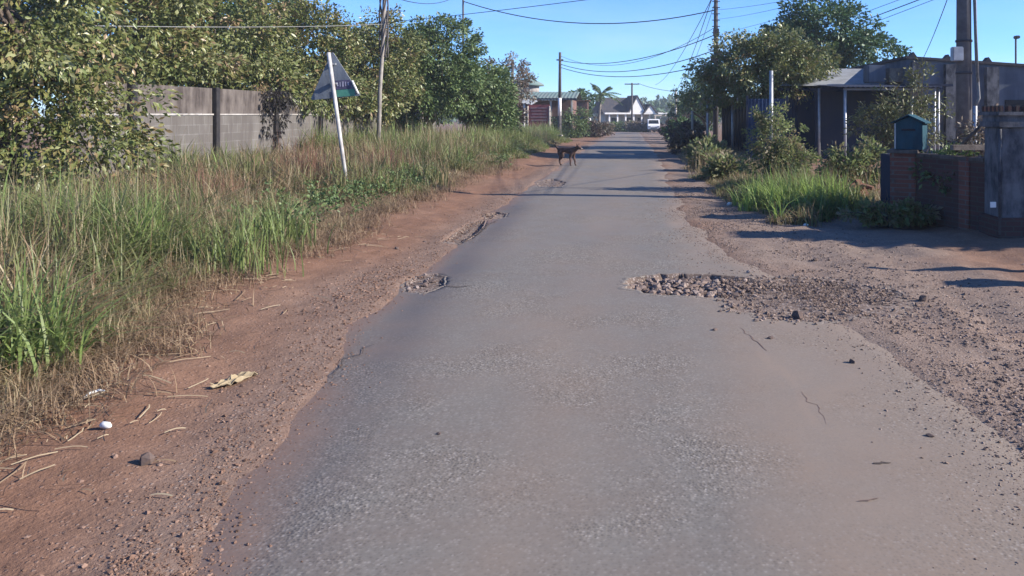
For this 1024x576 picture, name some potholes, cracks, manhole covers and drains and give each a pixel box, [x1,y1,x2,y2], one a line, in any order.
pothole [535,178,568,187]
pothole [616,273,766,300]
pothole [442,220,487,245]
pothole [405,273,447,294]
